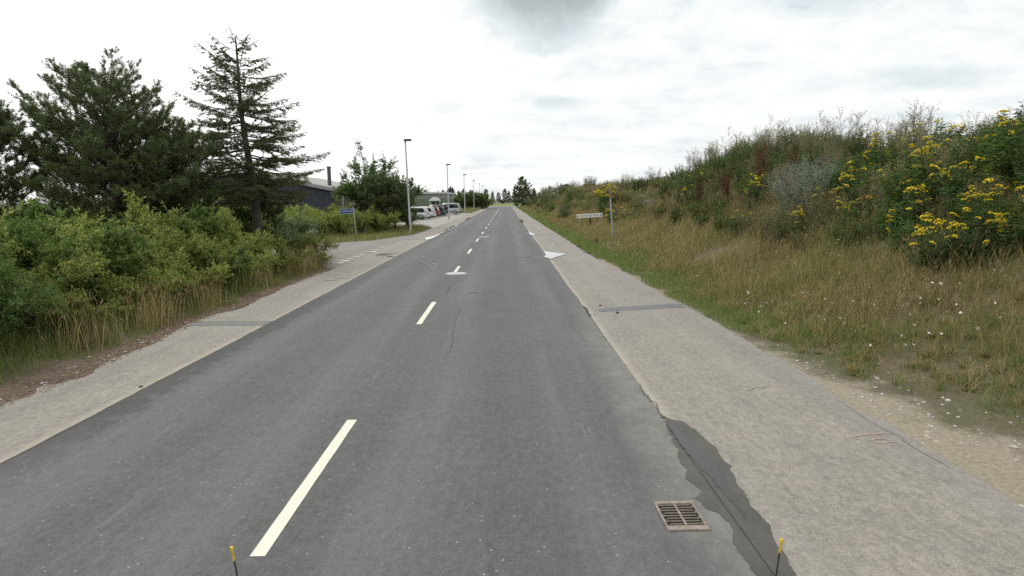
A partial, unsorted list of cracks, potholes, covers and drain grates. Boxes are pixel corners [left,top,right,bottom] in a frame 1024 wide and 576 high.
drain grate [653,501,710,531]
crack [845,404,954,471]
